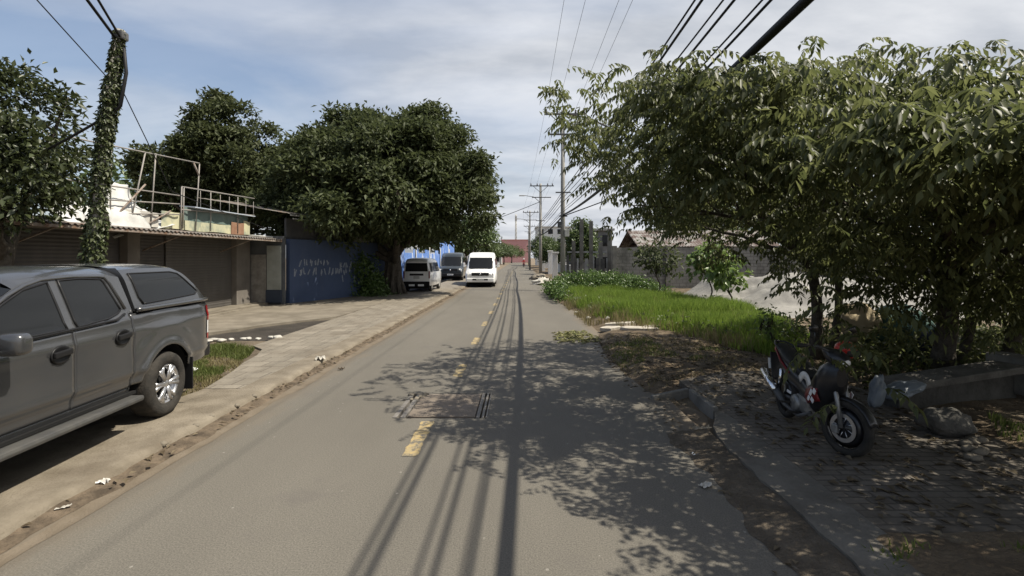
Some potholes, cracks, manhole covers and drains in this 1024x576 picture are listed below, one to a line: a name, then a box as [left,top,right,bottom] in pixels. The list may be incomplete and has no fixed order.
manhole cover [392,392,492,418]
